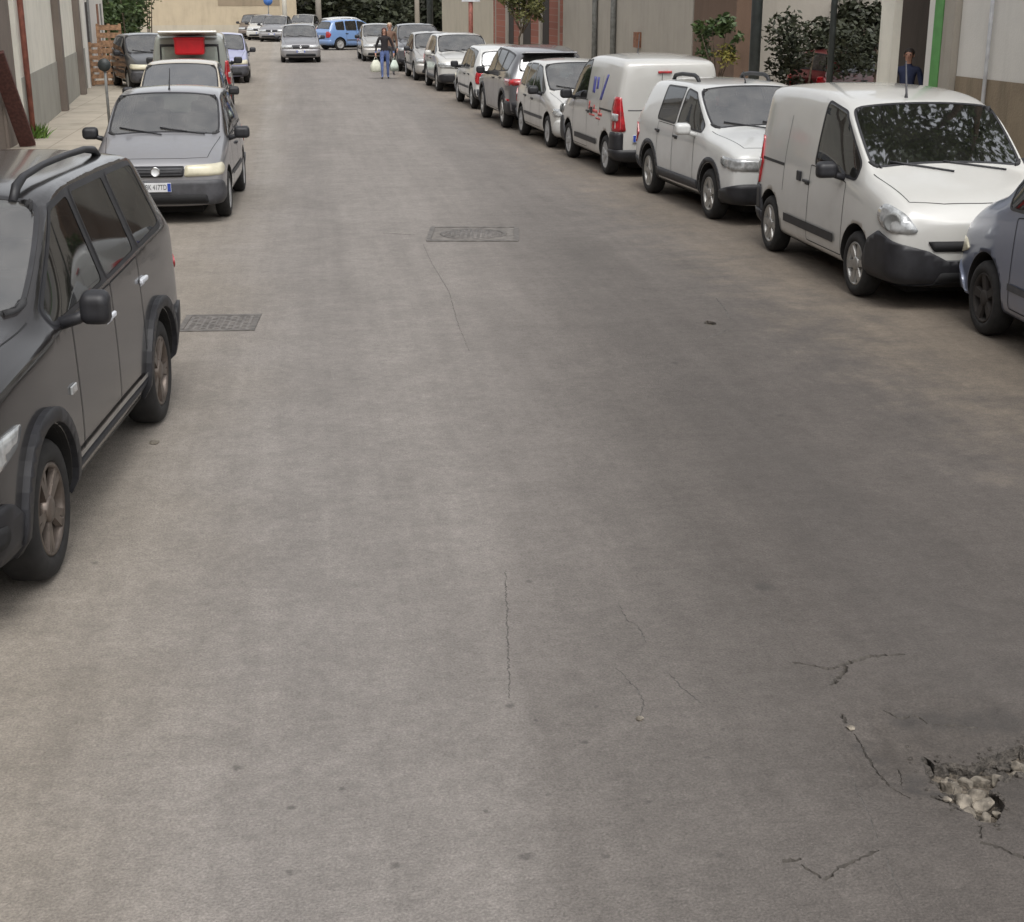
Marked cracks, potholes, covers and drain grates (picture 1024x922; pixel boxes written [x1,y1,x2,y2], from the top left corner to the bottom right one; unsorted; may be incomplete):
crack [388,233,469,350]
crack [620,607,646,643]
crack [761,573,905,686]
crack [669,674,701,703]
crack [615,667,645,716]
pothole [906,740,1024,831]
crack [930,795,1024,859]
crack [782,710,978,897]
manhole cover [426,226,519,242]
